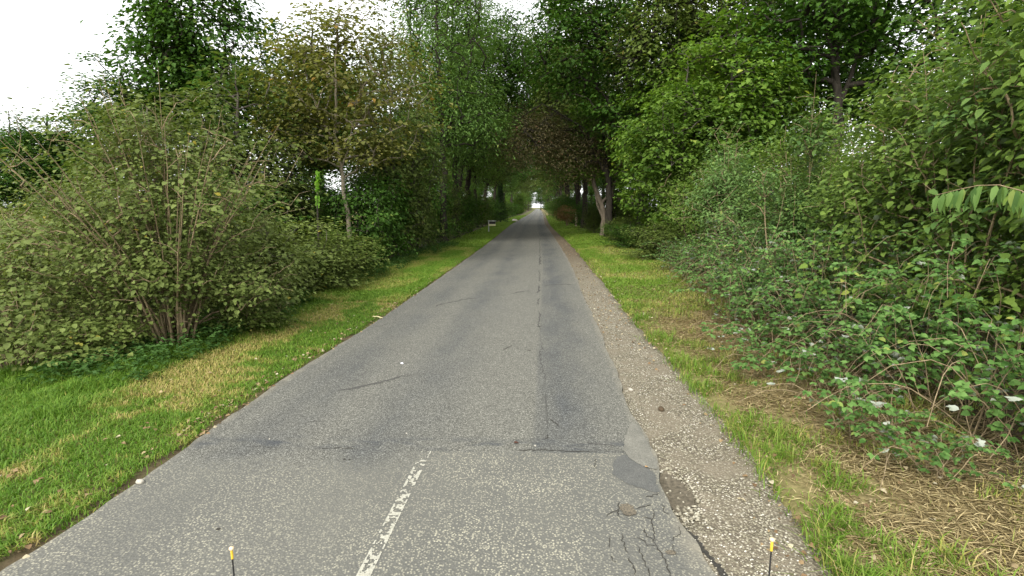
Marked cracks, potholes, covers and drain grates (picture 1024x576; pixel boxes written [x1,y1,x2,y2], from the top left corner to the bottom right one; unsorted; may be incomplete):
crack [336,373,425,391]
crack [606,494,728,576]
pothole [659,468,708,523]
